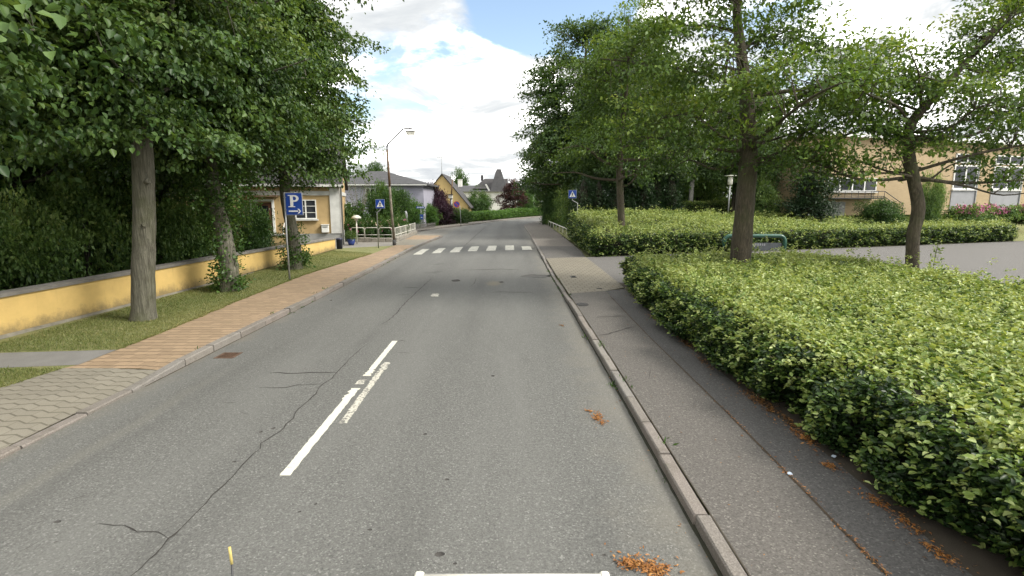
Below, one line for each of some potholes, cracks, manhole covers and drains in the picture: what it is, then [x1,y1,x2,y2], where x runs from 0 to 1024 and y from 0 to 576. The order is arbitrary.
crack [100,348,361,576]
